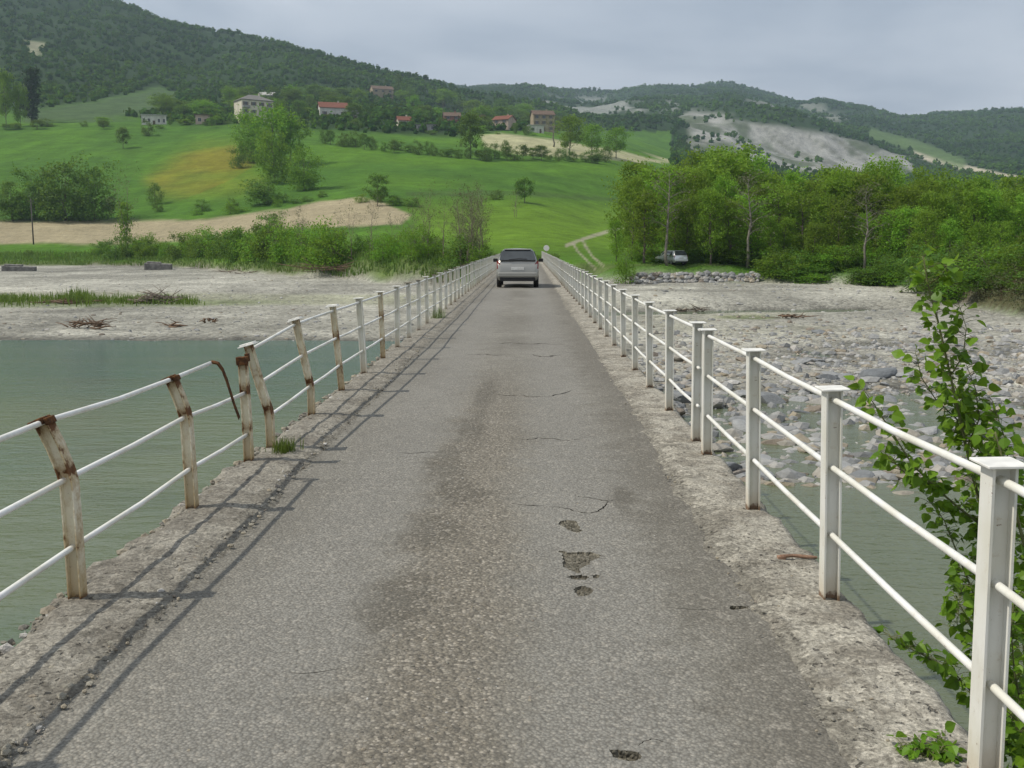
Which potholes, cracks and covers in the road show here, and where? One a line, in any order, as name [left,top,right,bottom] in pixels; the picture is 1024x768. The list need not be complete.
pothole [558,551,602,573]
crack [512,496,622,513]
pothole [609,749,642,761]
pothole [573,586,593,596]
pothole [558,520,583,533]
